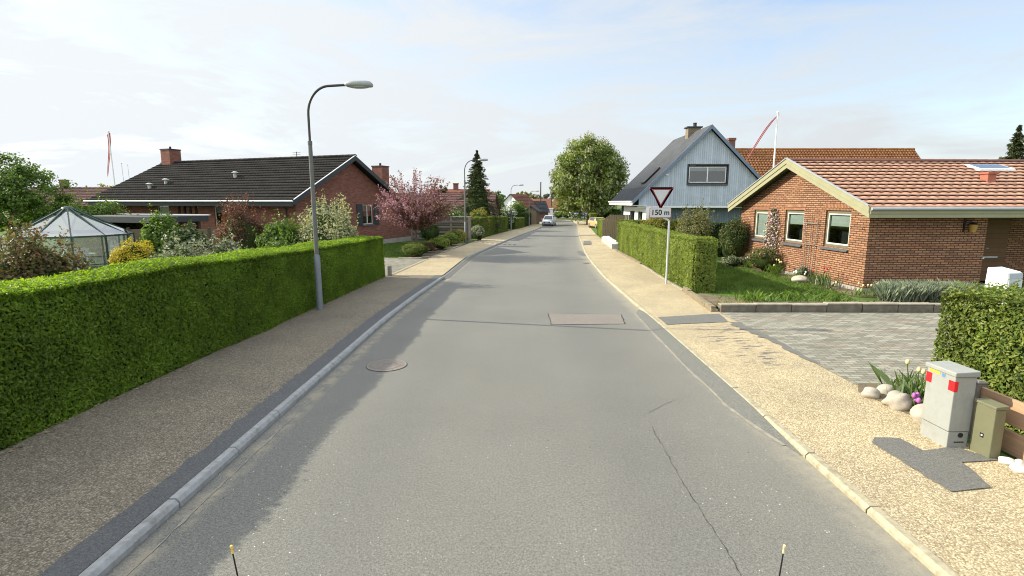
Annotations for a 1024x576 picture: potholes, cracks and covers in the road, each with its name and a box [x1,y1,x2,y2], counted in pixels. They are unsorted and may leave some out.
crack [650,399,741,575]
manhole cover [366,359,407,372]
